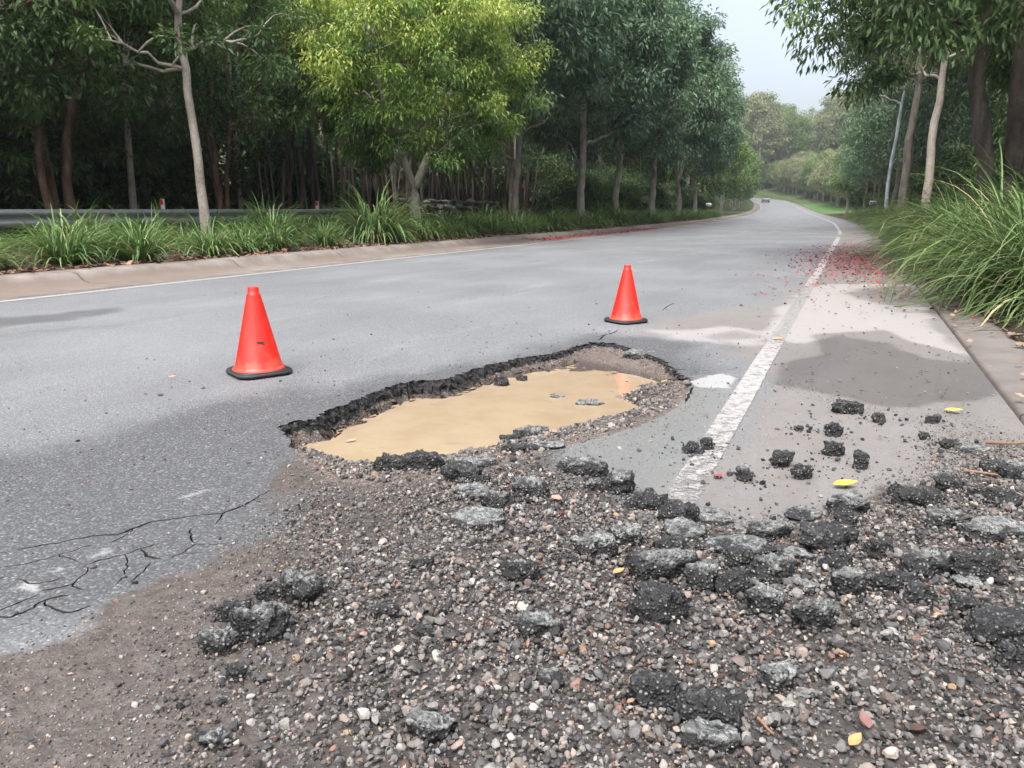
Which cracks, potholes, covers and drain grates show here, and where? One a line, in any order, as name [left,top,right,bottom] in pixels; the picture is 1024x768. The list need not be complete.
crack [0,489,272,627]
pothole [276,342,693,487]
